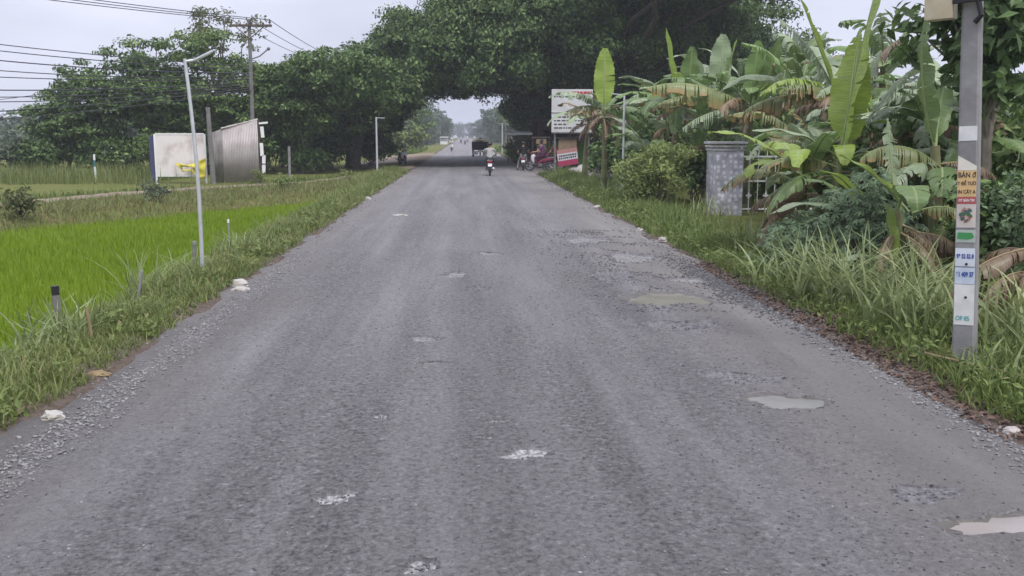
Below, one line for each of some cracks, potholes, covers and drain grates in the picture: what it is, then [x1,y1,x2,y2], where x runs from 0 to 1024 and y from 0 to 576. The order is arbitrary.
pothole [897,502,1024,535]
pothole [582,285,745,311]
pothole [439,270,469,279]
pothole [713,390,860,415]
pothole [385,550,453,575]
pothole [290,488,373,510]
pothole [490,441,561,464]
pothole [396,334,448,343]
pothole [886,479,995,504]
